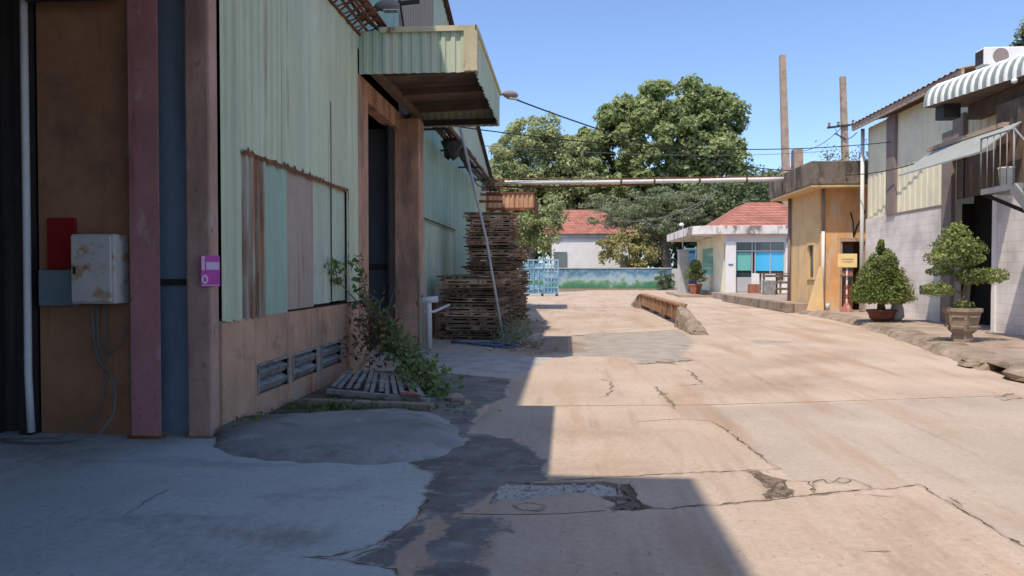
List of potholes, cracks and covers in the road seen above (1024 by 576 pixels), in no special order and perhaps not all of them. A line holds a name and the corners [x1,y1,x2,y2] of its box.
pothole [602,483,652,511]
crack [640,478,1024,547]
crack [647,346,703,409]
crack [561,421,777,480]
pothole [746,471,794,499]
pothole [490,481,620,504]
